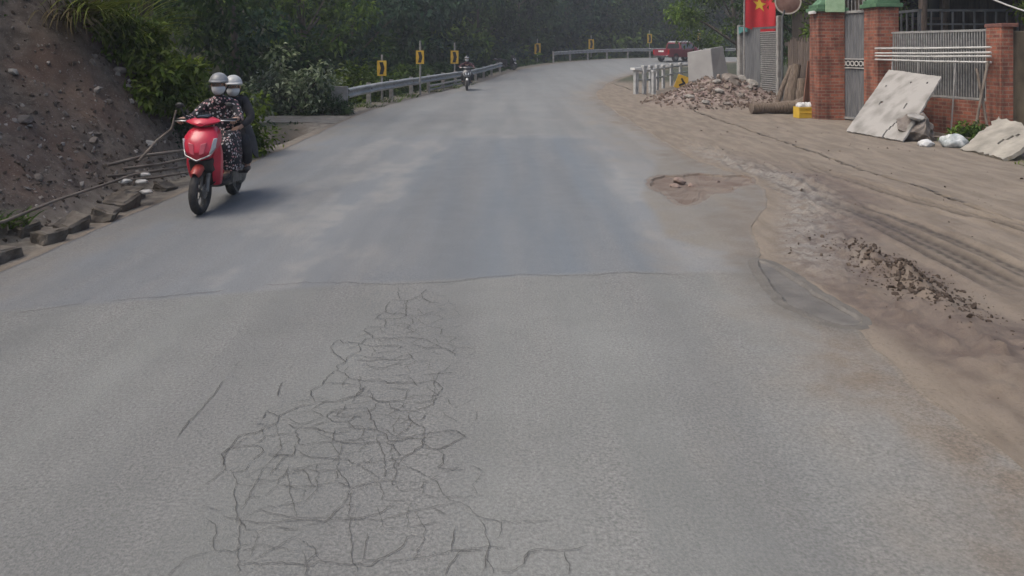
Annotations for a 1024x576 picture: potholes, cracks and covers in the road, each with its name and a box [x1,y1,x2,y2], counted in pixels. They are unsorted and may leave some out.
pothole [645,173,756,206]
crack [169,283,587,575]
